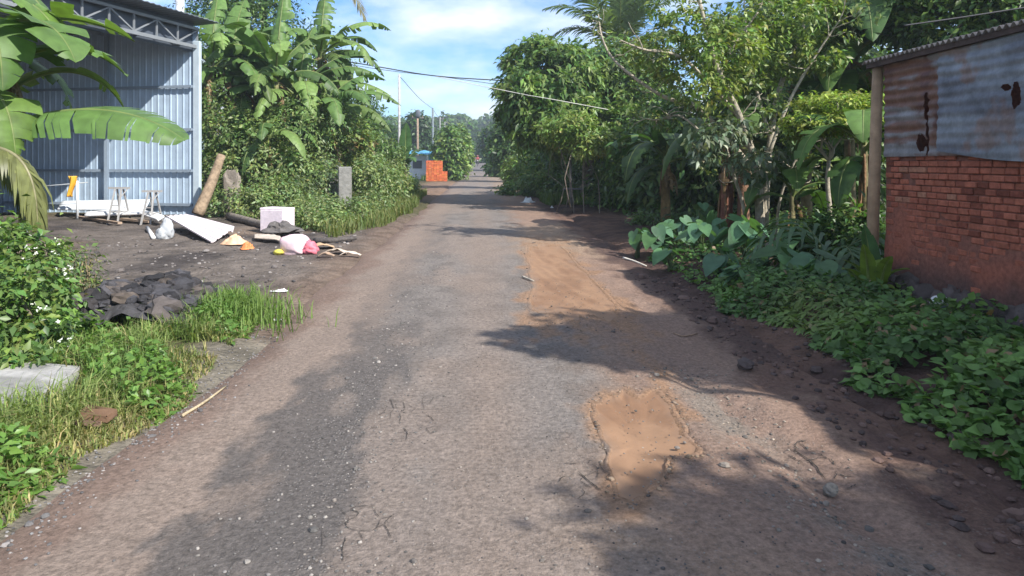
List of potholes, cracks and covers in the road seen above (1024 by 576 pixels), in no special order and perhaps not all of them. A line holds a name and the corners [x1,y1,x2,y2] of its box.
pothole [590,386,704,506]
crack [372,395,438,440]
pothole [525,240,628,329]
crack [321,505,394,559]
crack [559,459,608,500]
